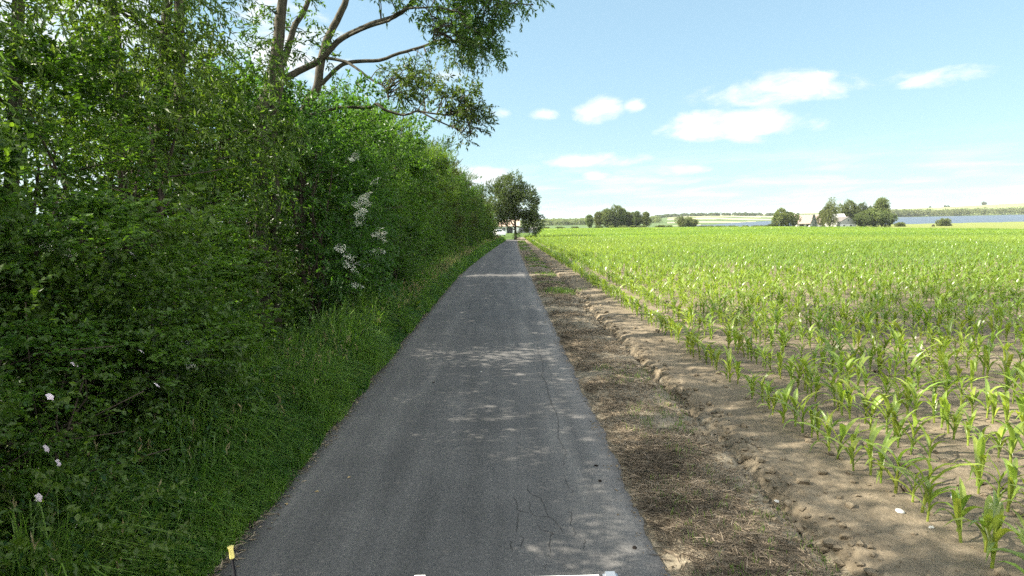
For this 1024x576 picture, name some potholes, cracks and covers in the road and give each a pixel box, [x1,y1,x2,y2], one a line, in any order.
crack [509,490,586,570]
